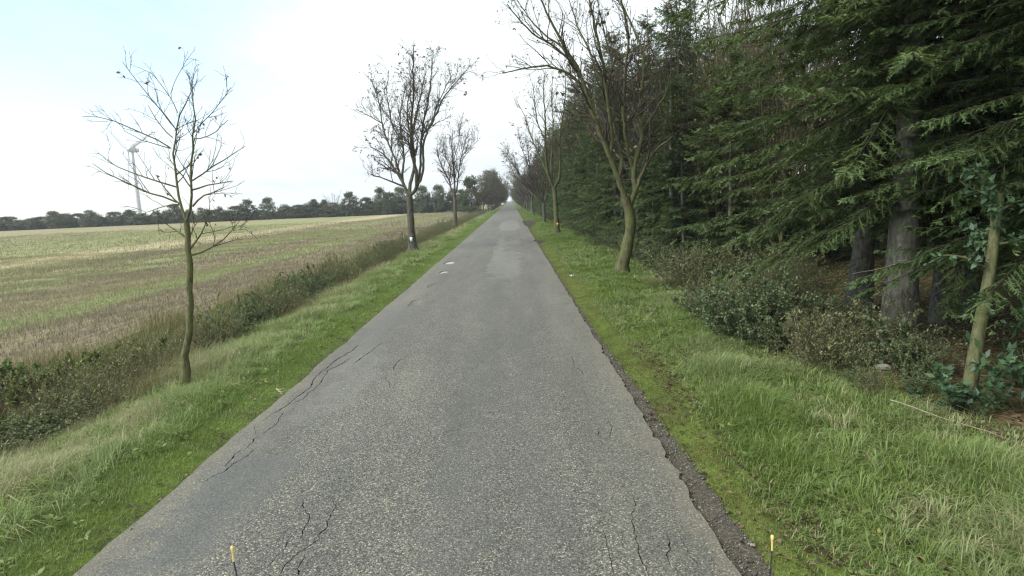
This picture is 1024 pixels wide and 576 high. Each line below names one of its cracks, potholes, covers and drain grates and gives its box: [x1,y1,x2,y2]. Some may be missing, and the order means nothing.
crack [199,343,404,484]
crack [269,498,337,576]
crack [603,494,702,576]
